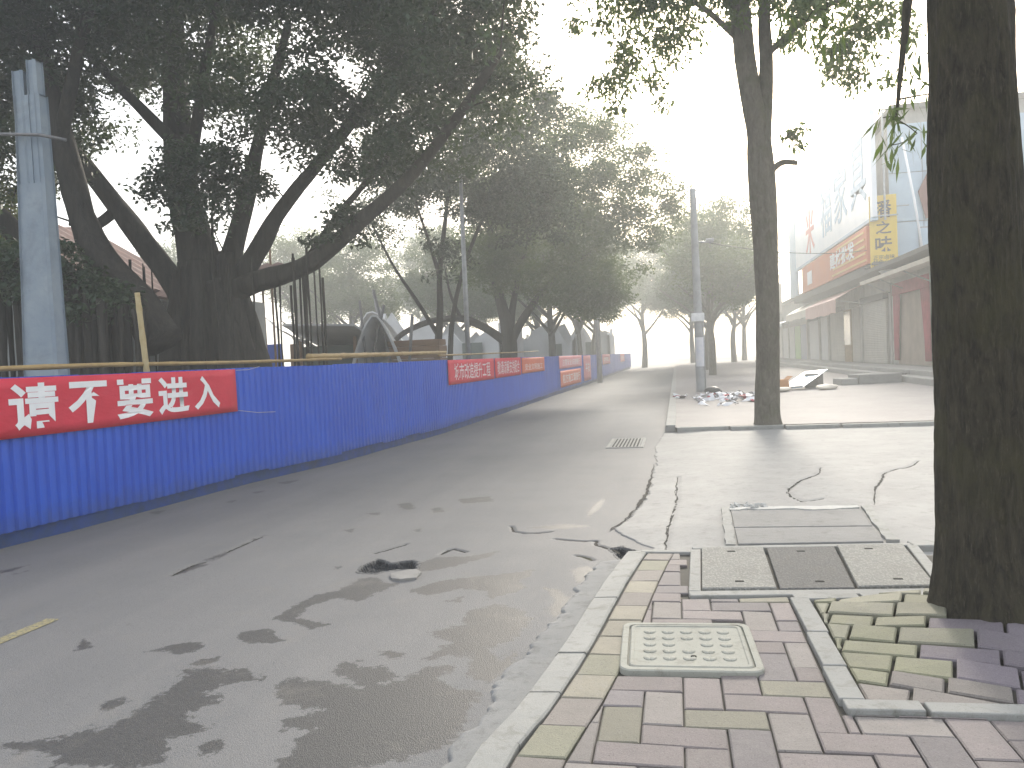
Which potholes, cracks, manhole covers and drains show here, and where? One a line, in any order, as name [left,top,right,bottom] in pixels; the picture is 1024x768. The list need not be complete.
drain grate [606,438,647,448]
manhole cover [766,546,855,590]
crack [786,468,821,502]
crack [873,461,919,505]
manhole cover [619,622,765,678]
crack [173,537,262,576]
crack [511,467,654,561]
pothole [355,558,421,574]
pothole [607,545,637,560]
manhole cover [702,547,777,591]
manhole cover [837,544,930,589]
